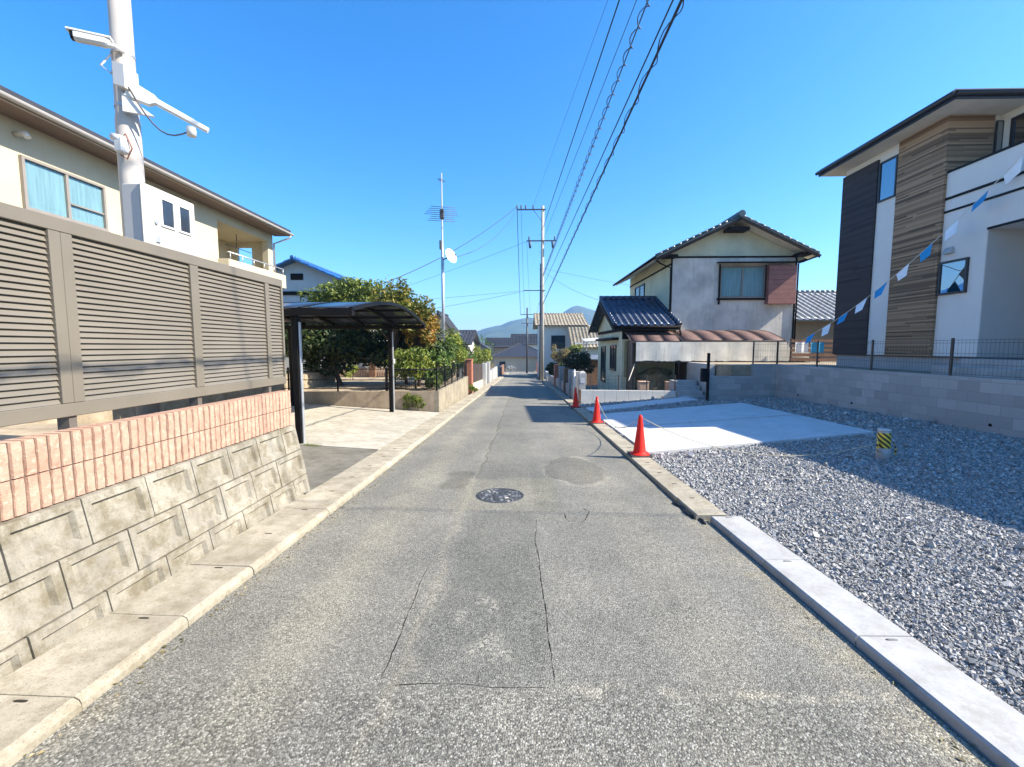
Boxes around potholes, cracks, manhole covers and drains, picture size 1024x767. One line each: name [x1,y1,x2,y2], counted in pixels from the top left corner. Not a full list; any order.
crack [381,520,555,688]
manhole cover [475,488,524,503]
